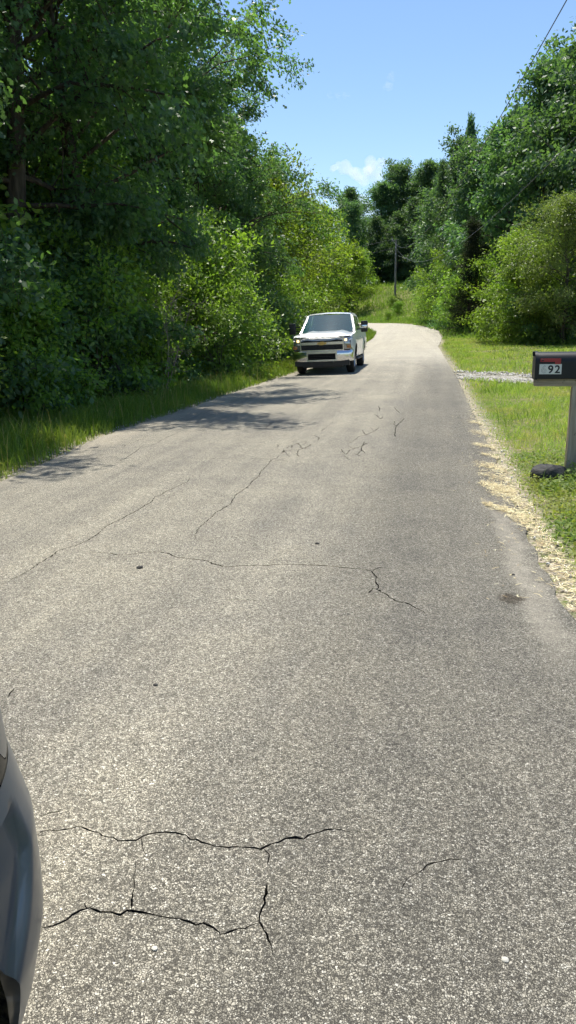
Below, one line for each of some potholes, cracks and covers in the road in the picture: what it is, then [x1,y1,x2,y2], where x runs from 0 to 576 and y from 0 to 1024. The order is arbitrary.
crack [402,859,460,887]
crack [95,552,424,612]
crack [6,478,190,583]
crack [195,426,328,539]
crack [41,811,348,955]
crack [341,406,404,459]
